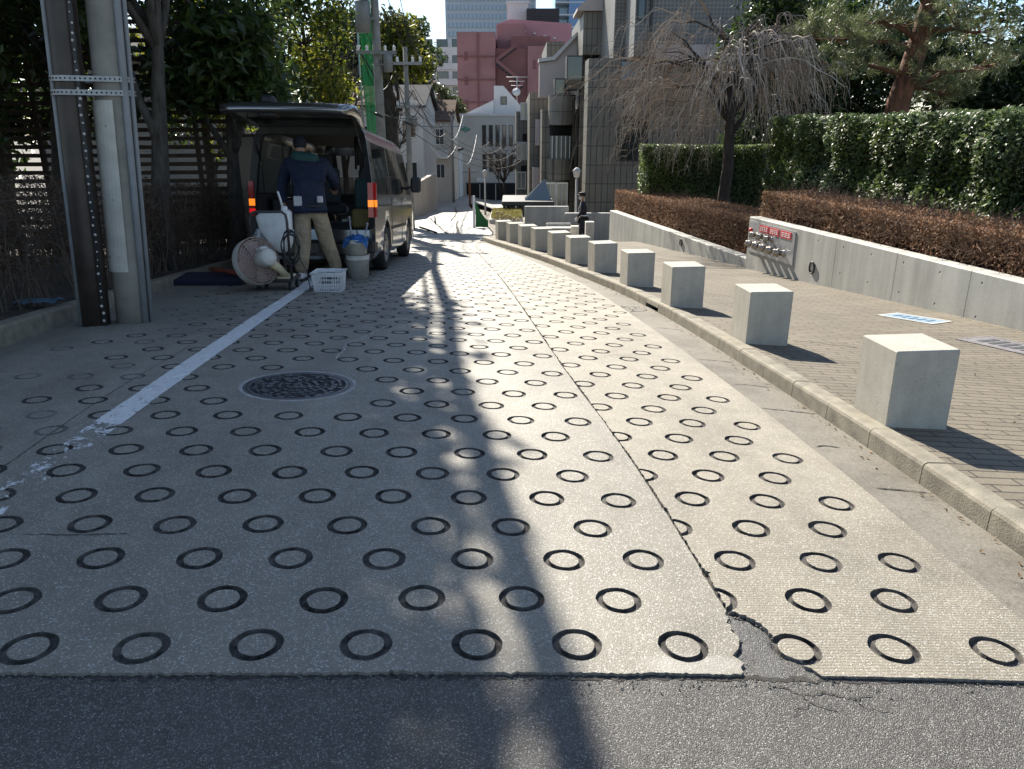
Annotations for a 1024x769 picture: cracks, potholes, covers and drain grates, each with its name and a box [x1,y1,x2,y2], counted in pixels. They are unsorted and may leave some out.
crack [0,673,1024,716]
pothole [726,614,834,691]
manhole cover [238,371,357,401]
